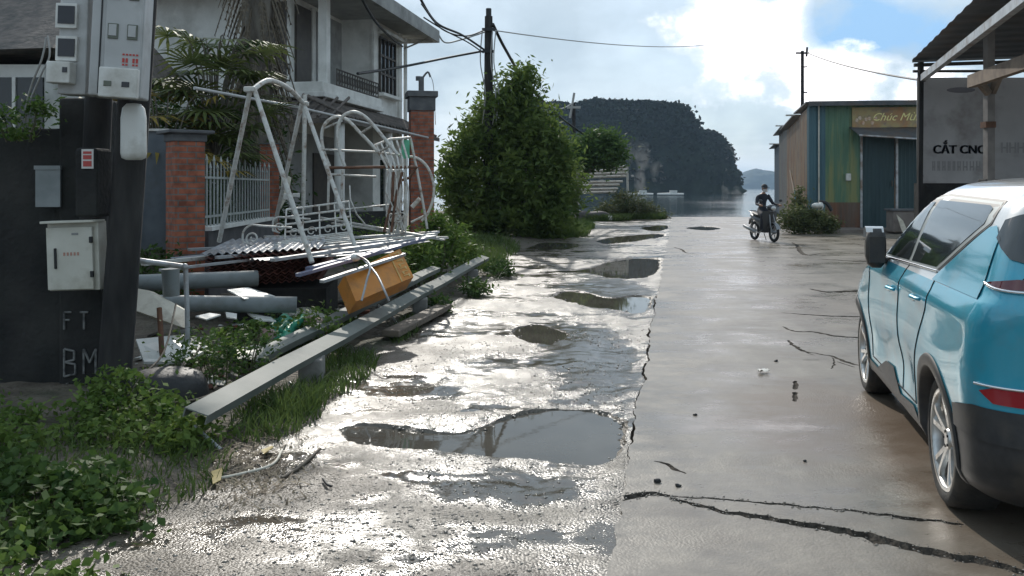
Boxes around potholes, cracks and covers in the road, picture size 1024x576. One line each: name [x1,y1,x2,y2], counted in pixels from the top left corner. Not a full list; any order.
crack [782,313,860,369]
pothole [512,324,570,345]
pothole [339,408,629,466]
pothole [595,233,666,244]
crack [792,242,866,262]
pothole [540,258,663,279]
crack [596,461,1024,576]
pothole [552,290,654,314]
